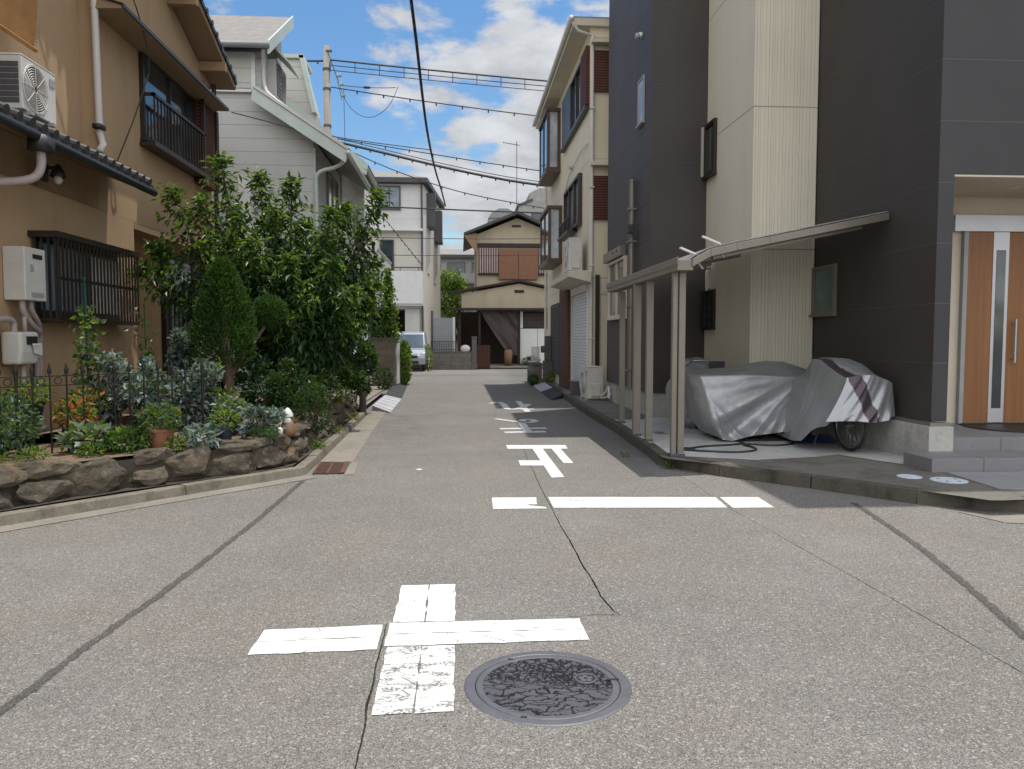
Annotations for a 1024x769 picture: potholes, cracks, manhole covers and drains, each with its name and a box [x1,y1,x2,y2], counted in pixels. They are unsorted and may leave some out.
crack [524,451,621,617]
drain grate [312,461,350,475]
manhole cover [464,651,632,727]
